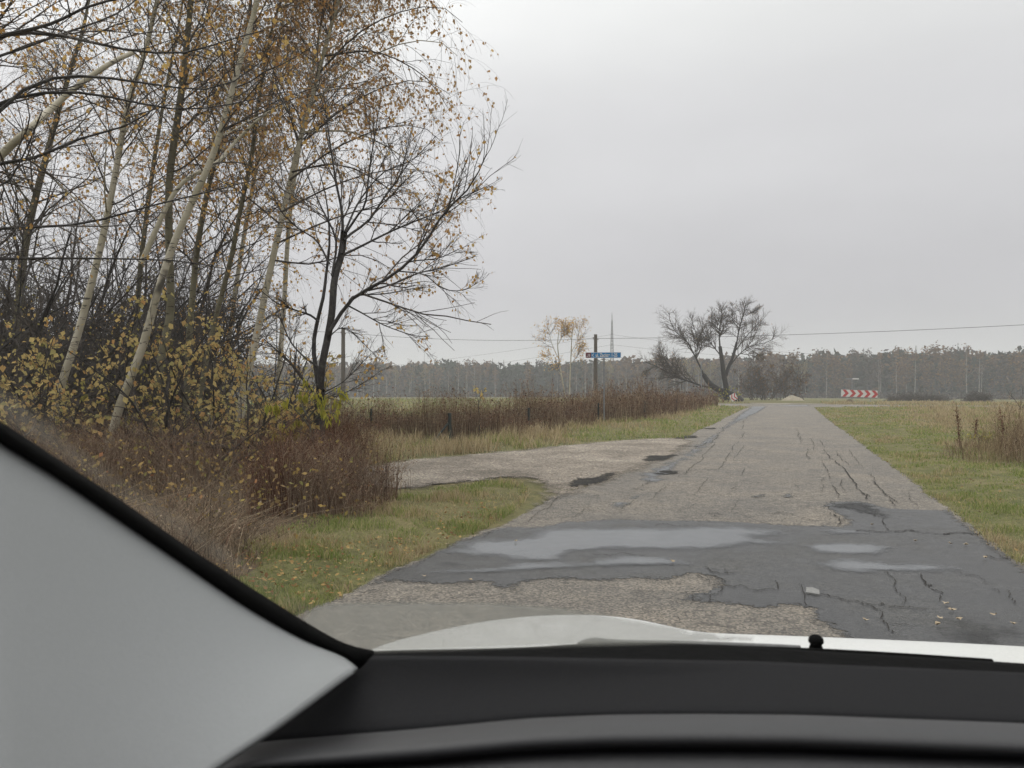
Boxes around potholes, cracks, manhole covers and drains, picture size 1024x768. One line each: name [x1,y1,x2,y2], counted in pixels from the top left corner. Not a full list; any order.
crack [682,425,745,516]
crack [661,565,779,619]
pothole [569,473,615,487]
crack [797,430,930,530]
crack [799,571,943,633]
